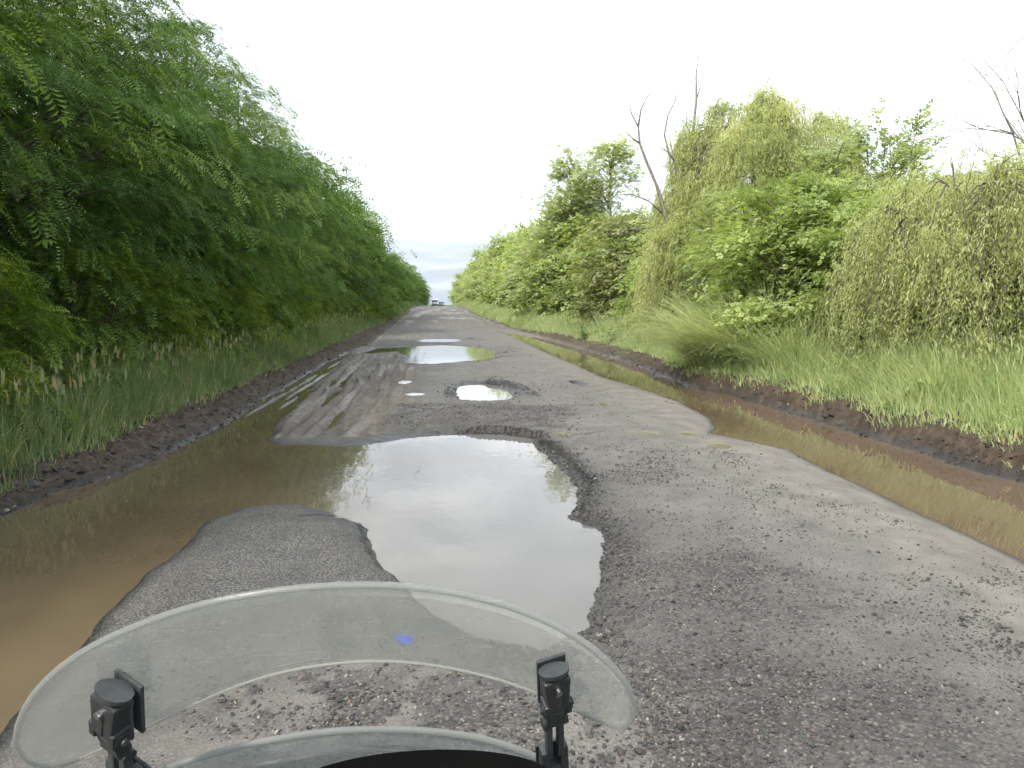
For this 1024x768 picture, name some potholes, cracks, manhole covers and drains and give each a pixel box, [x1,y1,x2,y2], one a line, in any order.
pothole [335,424,642,663]
pothole [351,343,508,364]
pothole [442,378,528,401]
